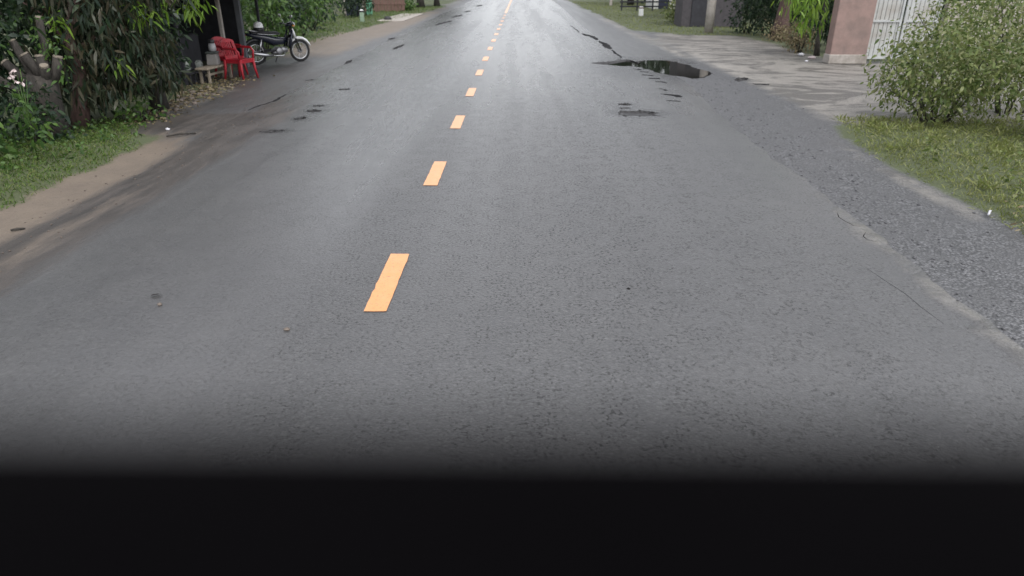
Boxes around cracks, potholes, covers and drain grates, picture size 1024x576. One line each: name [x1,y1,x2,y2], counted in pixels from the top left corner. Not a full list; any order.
pothole [593,59,713,79]
crack [570,25,682,102]
